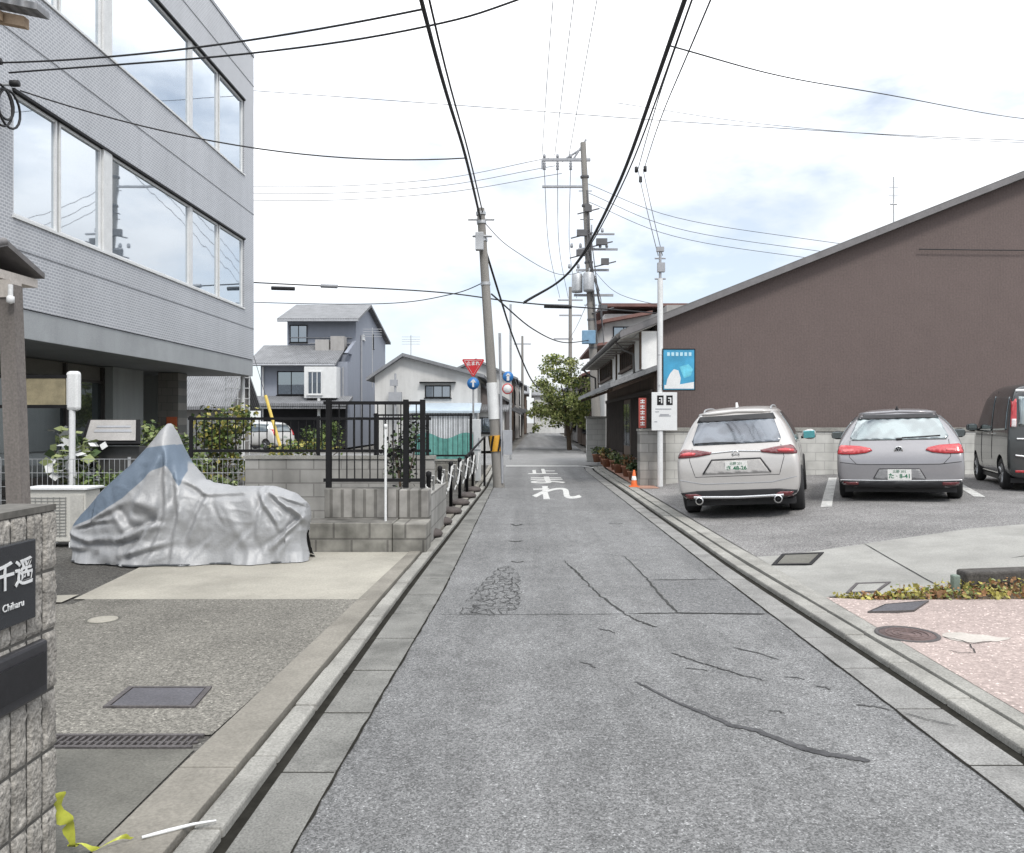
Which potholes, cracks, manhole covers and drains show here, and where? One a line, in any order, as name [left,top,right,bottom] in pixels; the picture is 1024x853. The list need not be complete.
crack [565,555,677,633]
manhole cover [874,626,941,643]
crack [460,561,524,616]
crack [673,647,777,681]
manhole cover [867,600,929,613]
drain grate [54,733,205,749]
manhole cover [103,686,212,708]
manhole cover [772,552,824,566]
manhole cover [845,581,891,594]
